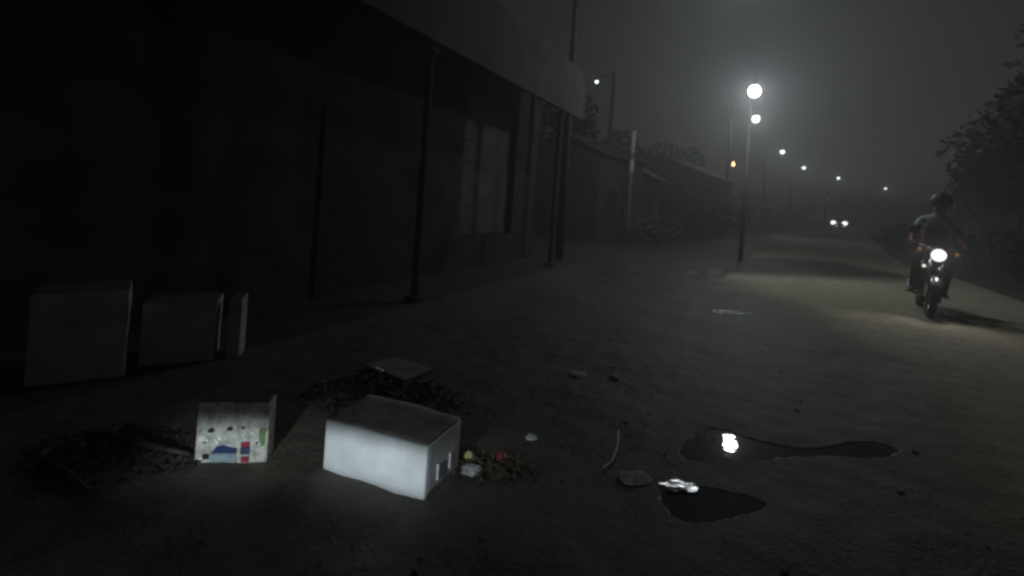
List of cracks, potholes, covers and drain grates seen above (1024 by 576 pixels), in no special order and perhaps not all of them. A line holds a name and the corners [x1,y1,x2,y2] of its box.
pothole [677,427,901,465]
pothole [657,484,769,524]
